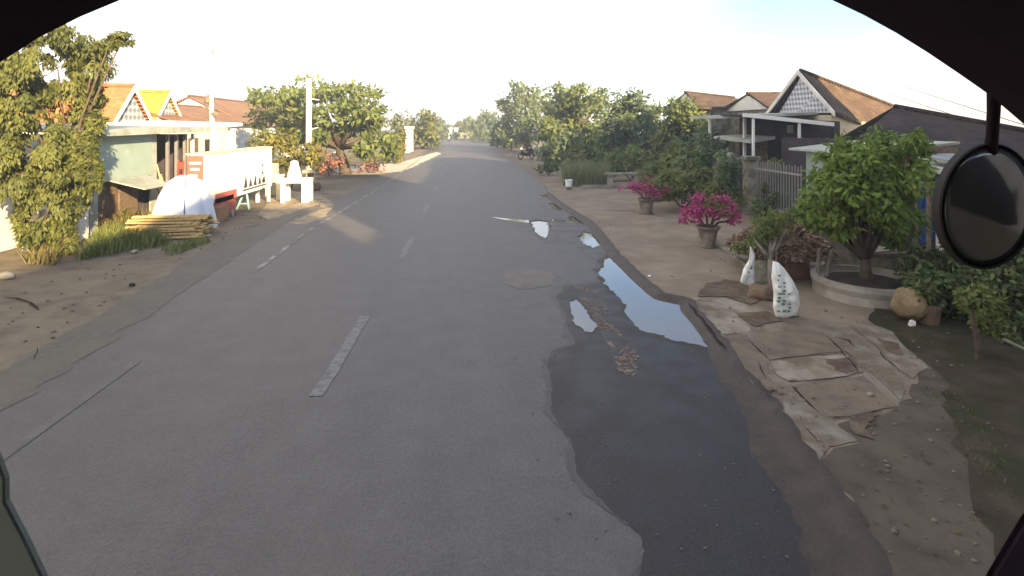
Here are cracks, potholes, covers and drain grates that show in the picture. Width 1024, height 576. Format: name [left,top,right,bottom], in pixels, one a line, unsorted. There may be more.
pothole [530,220,551,239]
pothole [570,285,640,376]
pothole [577,230,601,248]
